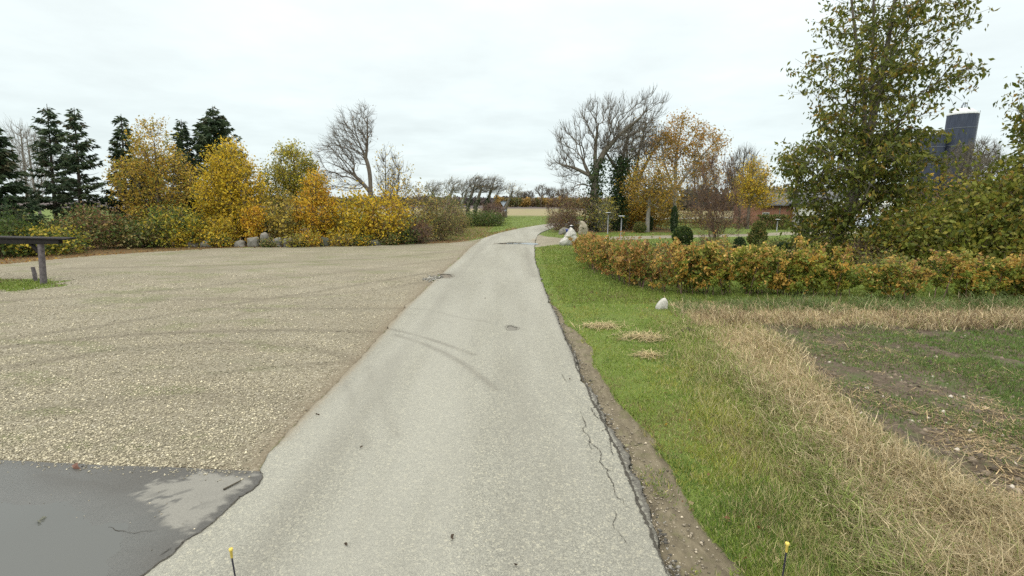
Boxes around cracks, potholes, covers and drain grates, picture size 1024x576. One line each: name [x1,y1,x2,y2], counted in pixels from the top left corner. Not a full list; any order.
crack [561,328,669,576]
